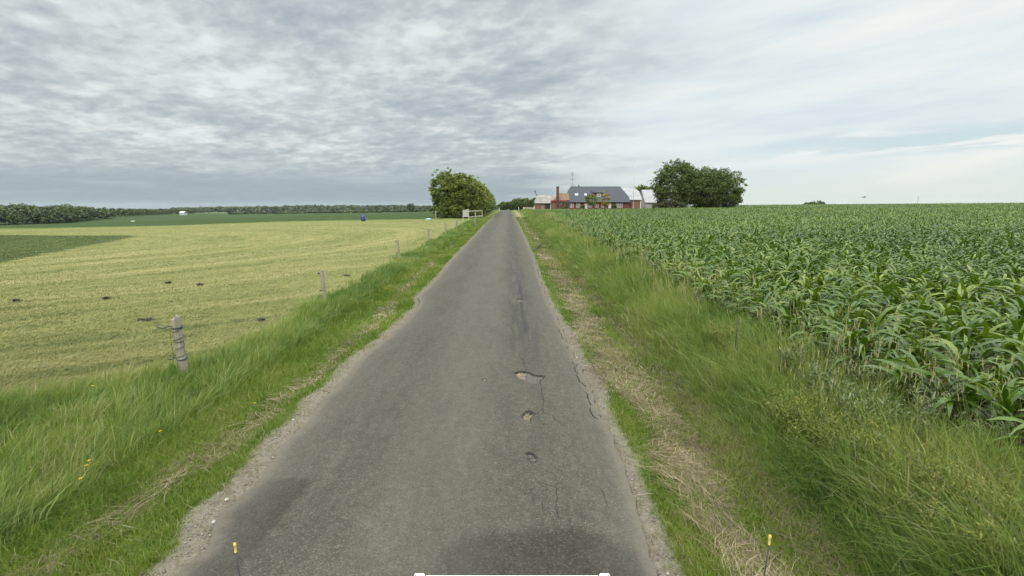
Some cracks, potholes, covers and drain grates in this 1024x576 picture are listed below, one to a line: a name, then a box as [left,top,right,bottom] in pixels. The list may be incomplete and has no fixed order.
crack [518,357,565,426]
crack [558,330,601,419]
pothole [525,452,539,463]
crack [533,470,559,518]
pothole [514,371,545,384]
